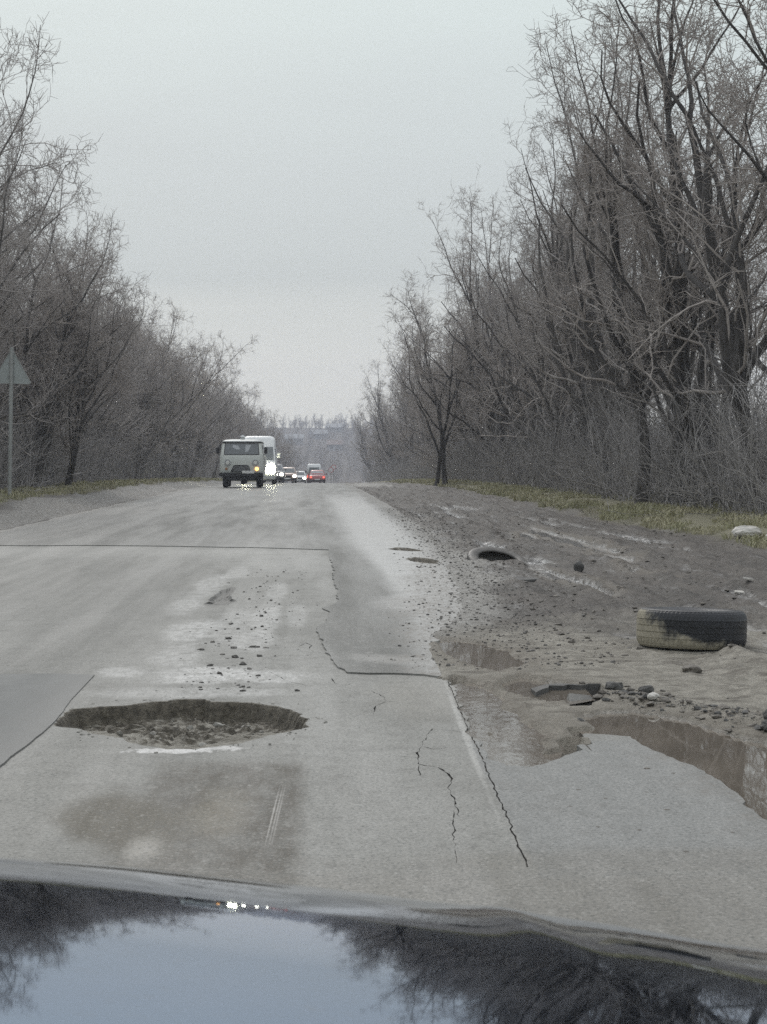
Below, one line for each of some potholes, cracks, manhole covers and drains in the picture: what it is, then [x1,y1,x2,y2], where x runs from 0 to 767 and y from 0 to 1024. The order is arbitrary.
pothole [54,699,309,749]
pothole [531,683,601,701]
pothole [204,587,237,606]
crack [402,729,459,863]
